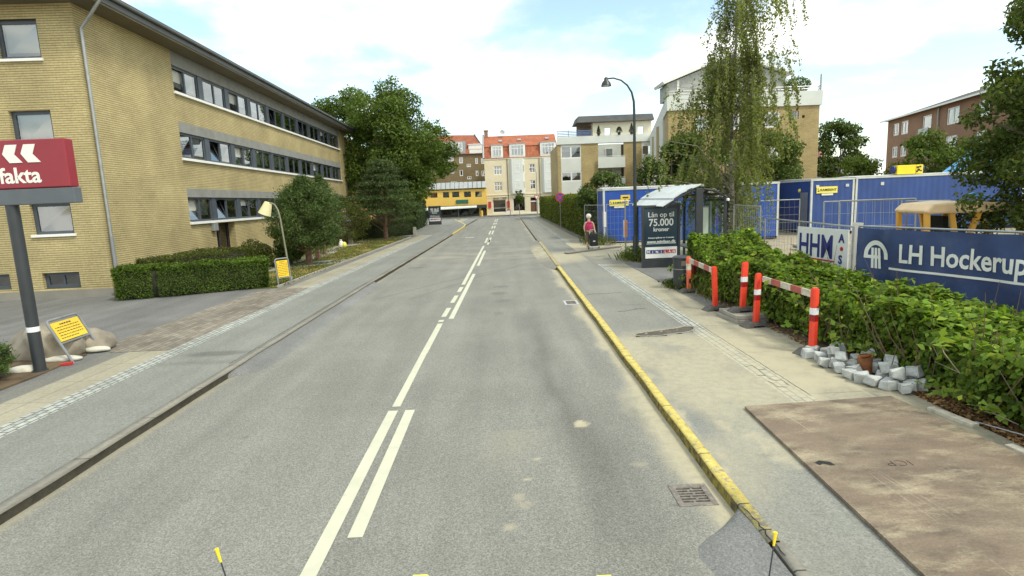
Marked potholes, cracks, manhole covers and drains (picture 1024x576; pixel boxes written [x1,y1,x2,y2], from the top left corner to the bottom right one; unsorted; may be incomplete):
drain grate [667,483,719,507]
